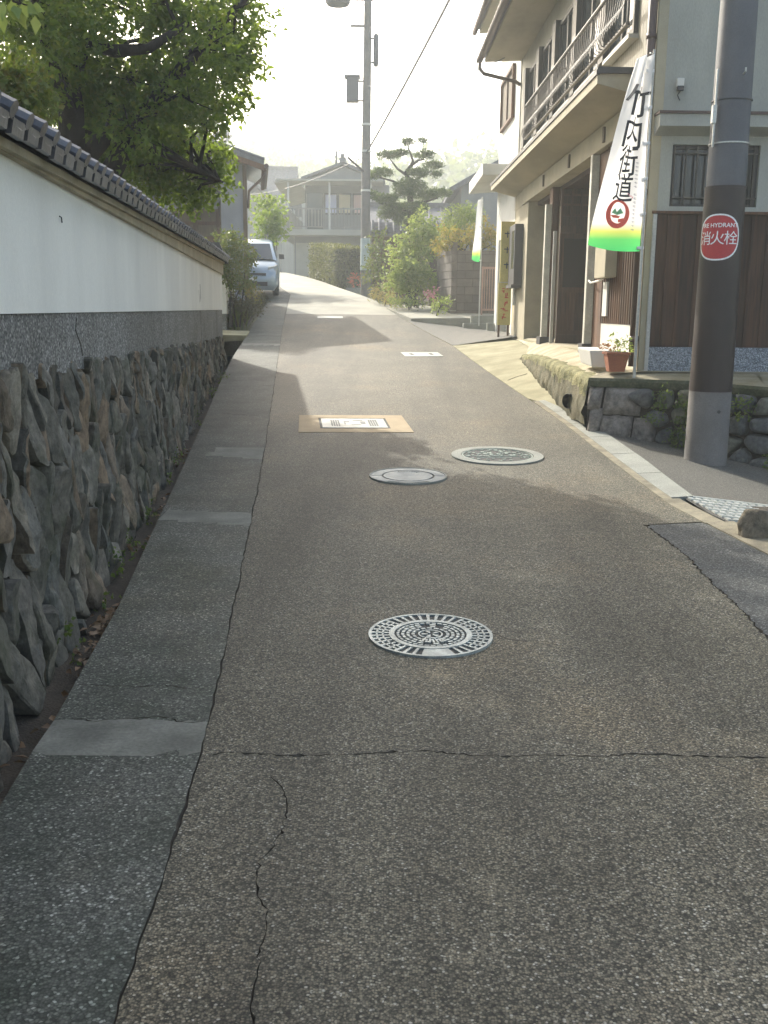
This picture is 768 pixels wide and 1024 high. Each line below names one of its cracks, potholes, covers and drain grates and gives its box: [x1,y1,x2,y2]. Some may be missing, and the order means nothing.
crack [249,777,288,1024]
crack [209,750,768,759]
manhole cover [368,614,493,659]
manhole cover [451,446,544,465]
drain grate [685,495,768,522]
manhole cover [369,467,447,485]
